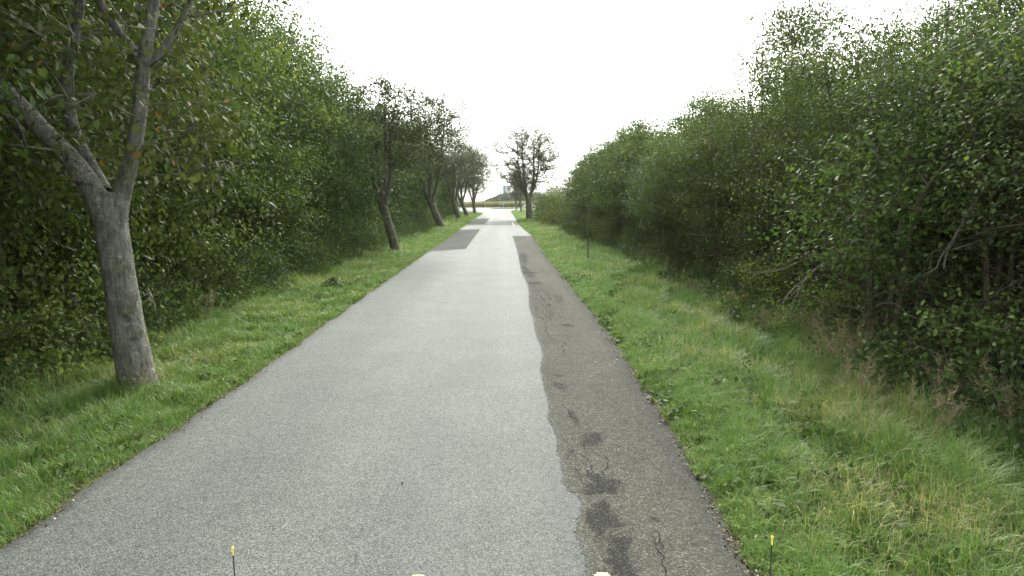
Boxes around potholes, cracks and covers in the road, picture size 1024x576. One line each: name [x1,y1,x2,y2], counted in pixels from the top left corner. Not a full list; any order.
crack [651,531,667,576]
crack [519,254,567,369]
crack [568,411,614,497]
